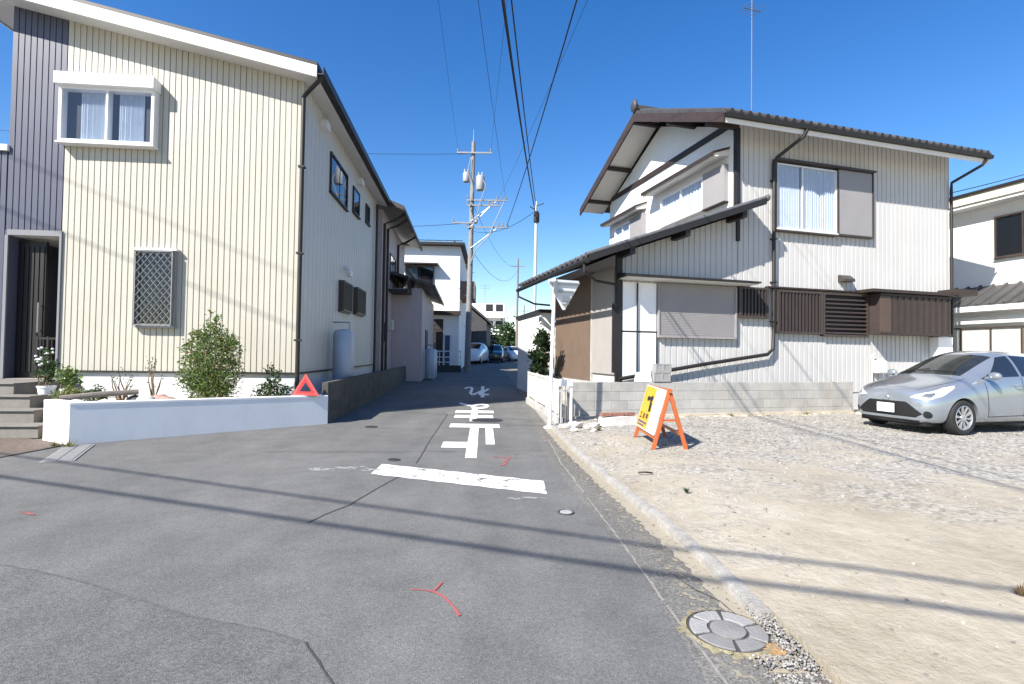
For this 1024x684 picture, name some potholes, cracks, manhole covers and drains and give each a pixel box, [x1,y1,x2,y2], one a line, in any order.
manhole cover [677,610,778,660]
